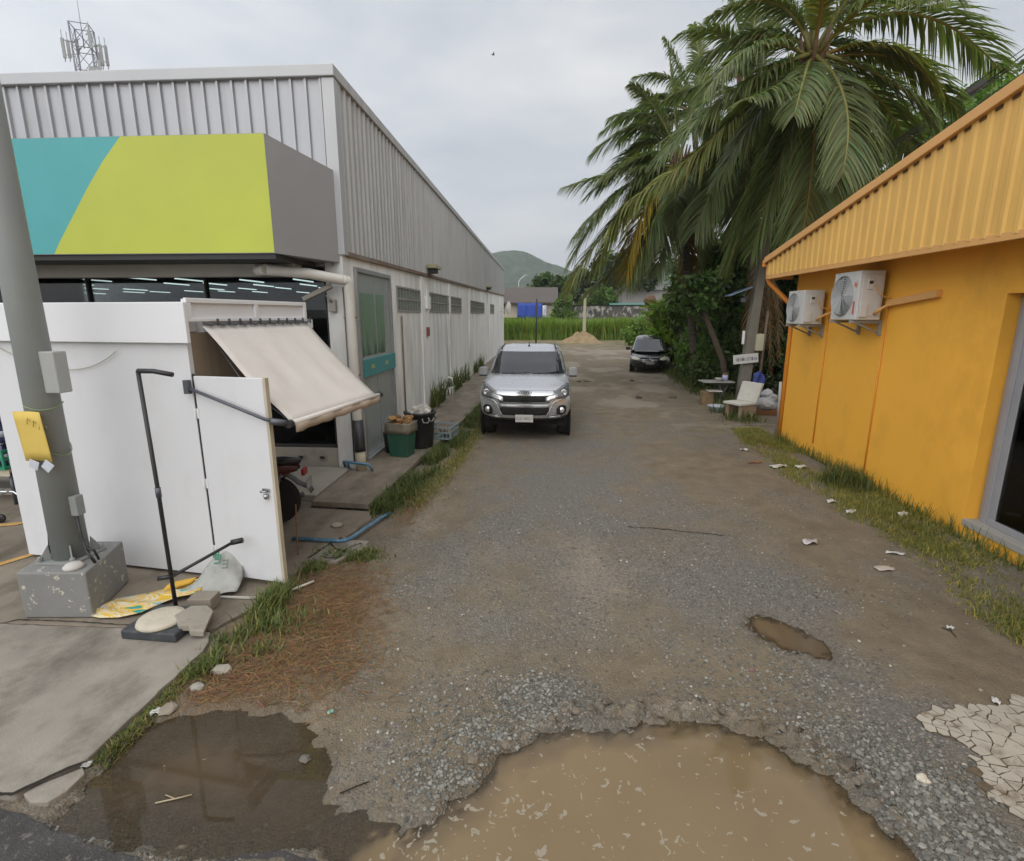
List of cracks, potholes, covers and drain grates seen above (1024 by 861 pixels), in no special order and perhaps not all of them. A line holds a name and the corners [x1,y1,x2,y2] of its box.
crack [914,694,1024,820]
pothole [323,693,950,861]
pothole [30,690,401,861]
pothole [728,604,857,672]
